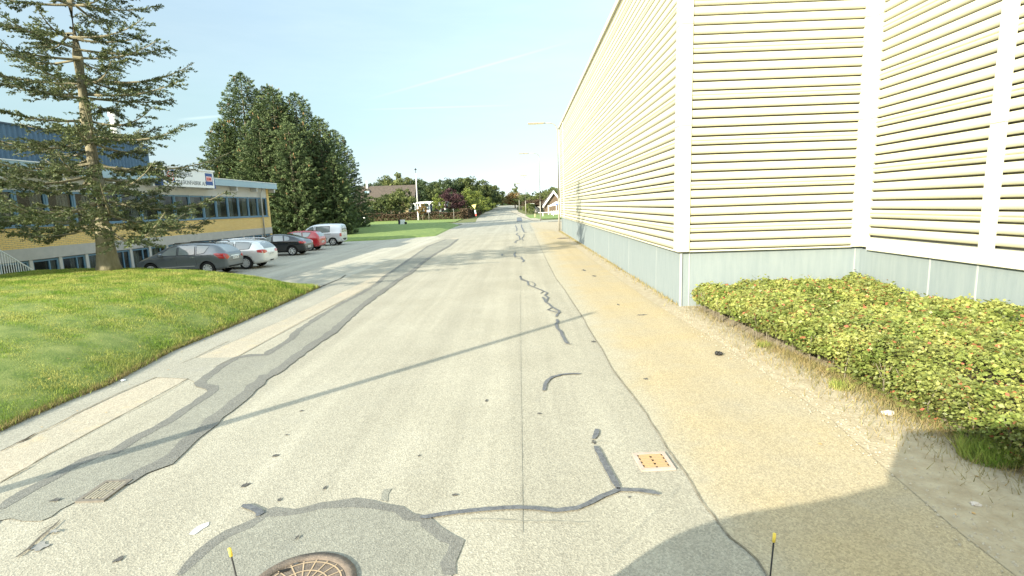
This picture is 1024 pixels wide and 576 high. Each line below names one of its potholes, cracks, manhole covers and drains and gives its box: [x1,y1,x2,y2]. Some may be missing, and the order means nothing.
crack [522,235,769,576]
manhole cover [259,552,357,576]
drain grate [632,451,676,472]
drain grate [75,479,133,503]
